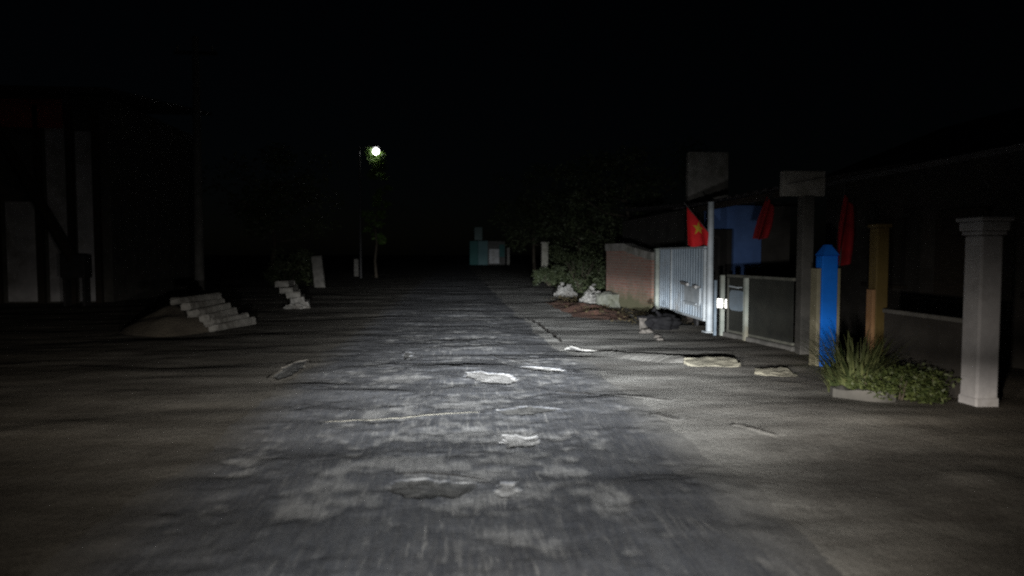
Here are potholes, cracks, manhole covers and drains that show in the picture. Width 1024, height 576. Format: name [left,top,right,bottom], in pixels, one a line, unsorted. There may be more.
crack [730,423,788,437]
pothole [559,346,600,354]
pothole [268,358,313,382]
pothole [515,365,574,374]
pothole [373,475,502,506]
pothole [481,478,536,504]
pothole [456,370,525,387]
pothole [488,432,554,452]
